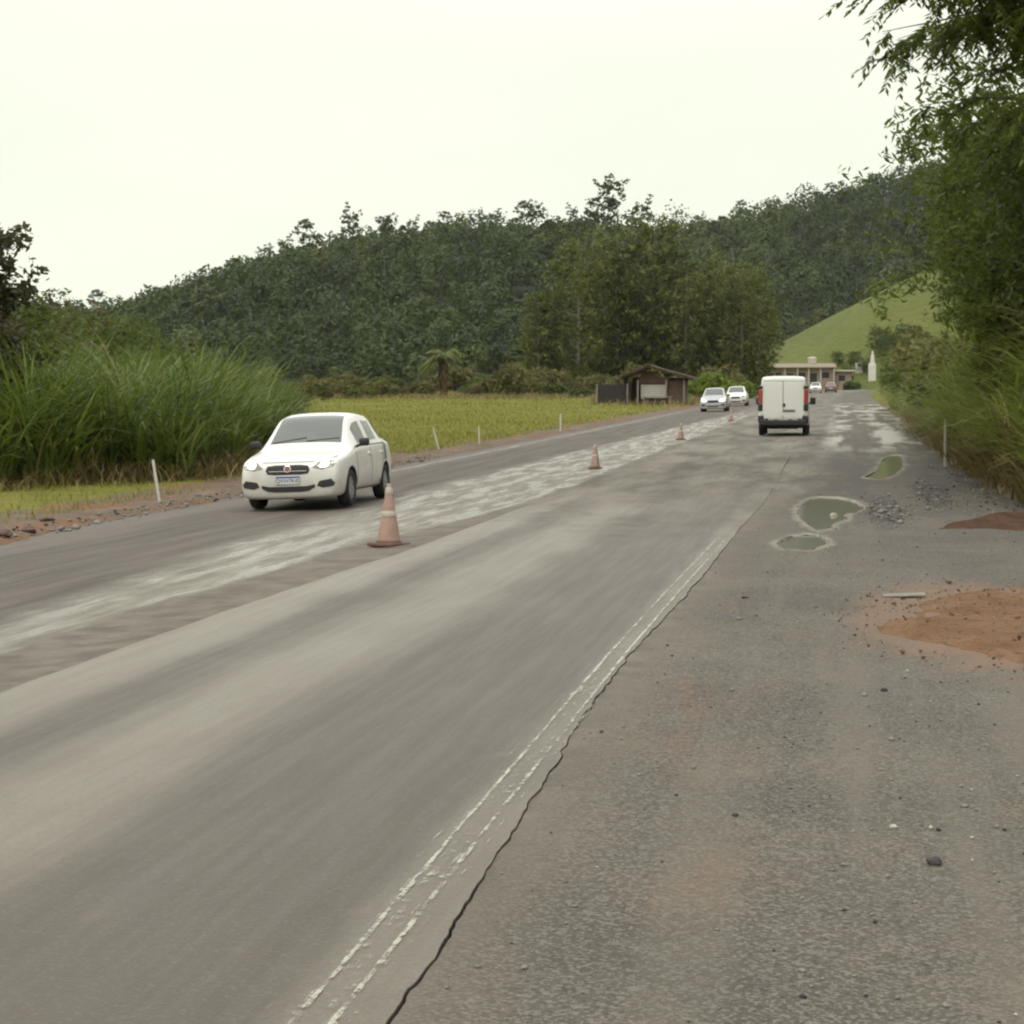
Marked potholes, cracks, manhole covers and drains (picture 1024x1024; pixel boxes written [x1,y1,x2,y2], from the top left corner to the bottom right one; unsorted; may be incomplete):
pothole [864,454,905,479]
pothole [795,496,867,531]
pothole [773,533,830,551]
